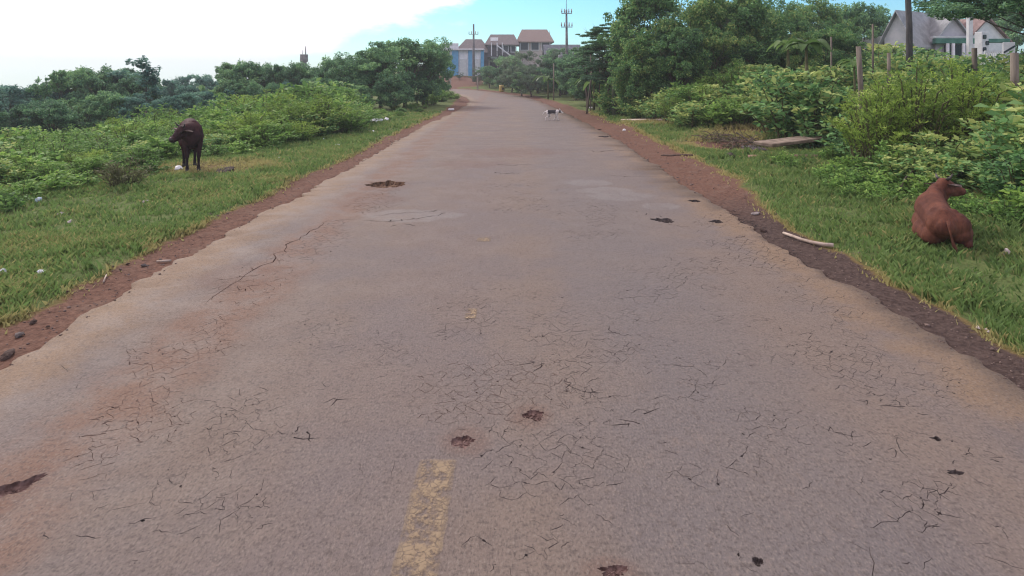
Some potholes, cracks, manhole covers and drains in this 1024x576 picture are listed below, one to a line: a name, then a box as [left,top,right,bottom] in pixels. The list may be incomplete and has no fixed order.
crack [368,210,970,525]
crack [43,372,343,564]
pothole [0,472,48,498]
crack [123,189,445,387]
pothole [597,565,628,576]
crack [660,401,1023,576]
pothole [364,180,405,188]
pothole [522,410,543,421]
pothole [451,435,476,450]
